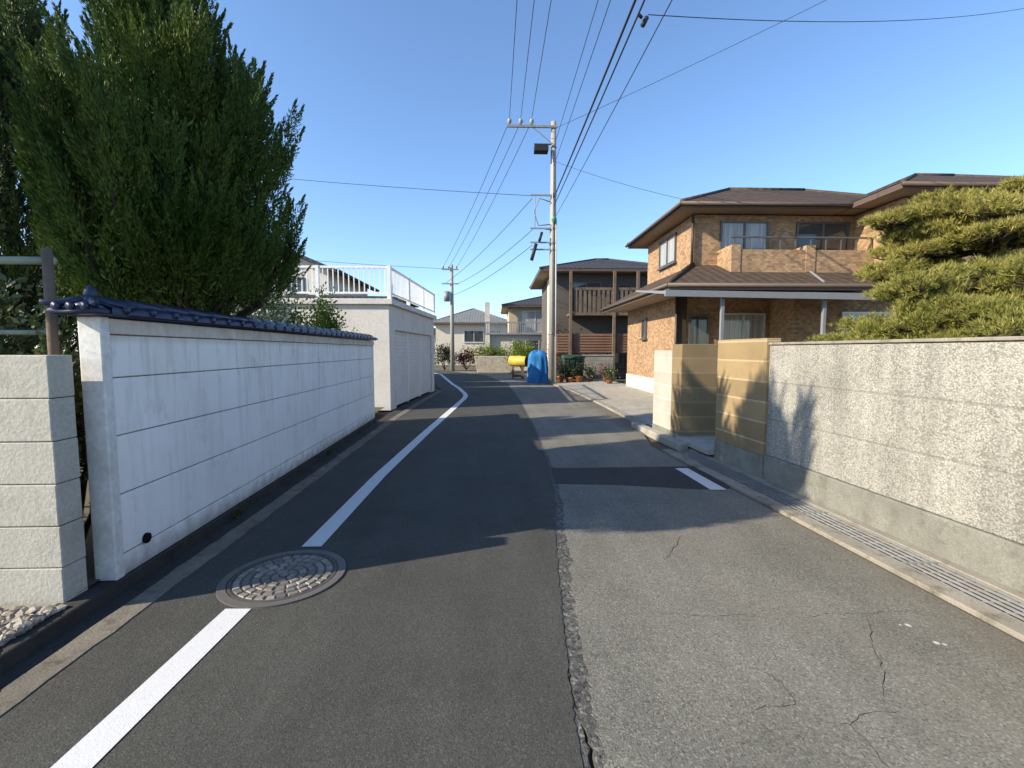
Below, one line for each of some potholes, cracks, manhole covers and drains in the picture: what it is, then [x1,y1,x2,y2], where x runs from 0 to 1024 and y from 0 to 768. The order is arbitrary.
crack [809,610,917,768]
crack [733,661,796,710]
manhole cover [216,550,346,609]
